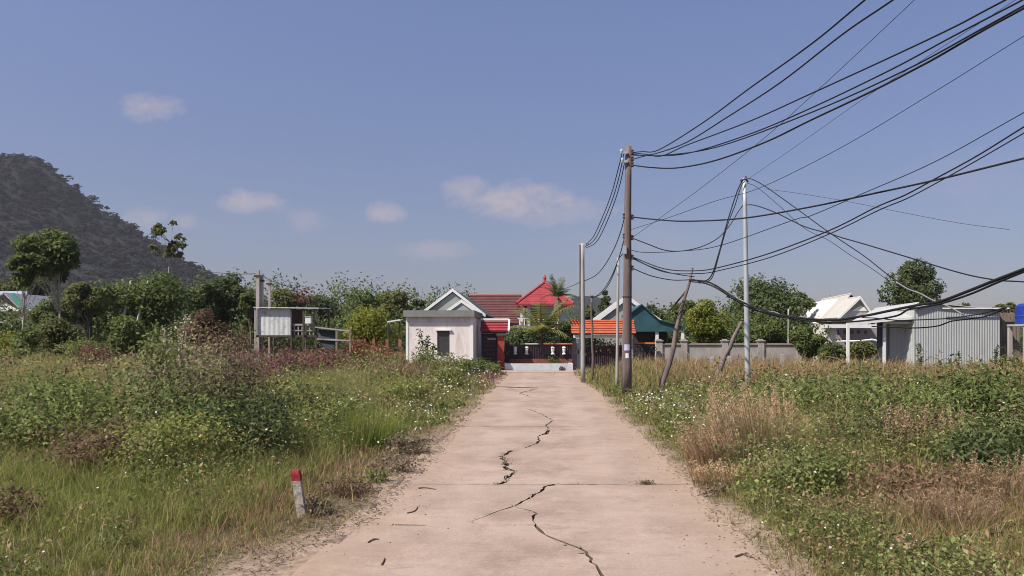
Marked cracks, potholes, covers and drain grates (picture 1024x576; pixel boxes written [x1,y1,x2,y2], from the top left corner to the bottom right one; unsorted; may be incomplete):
crack [468,386,621,576]
